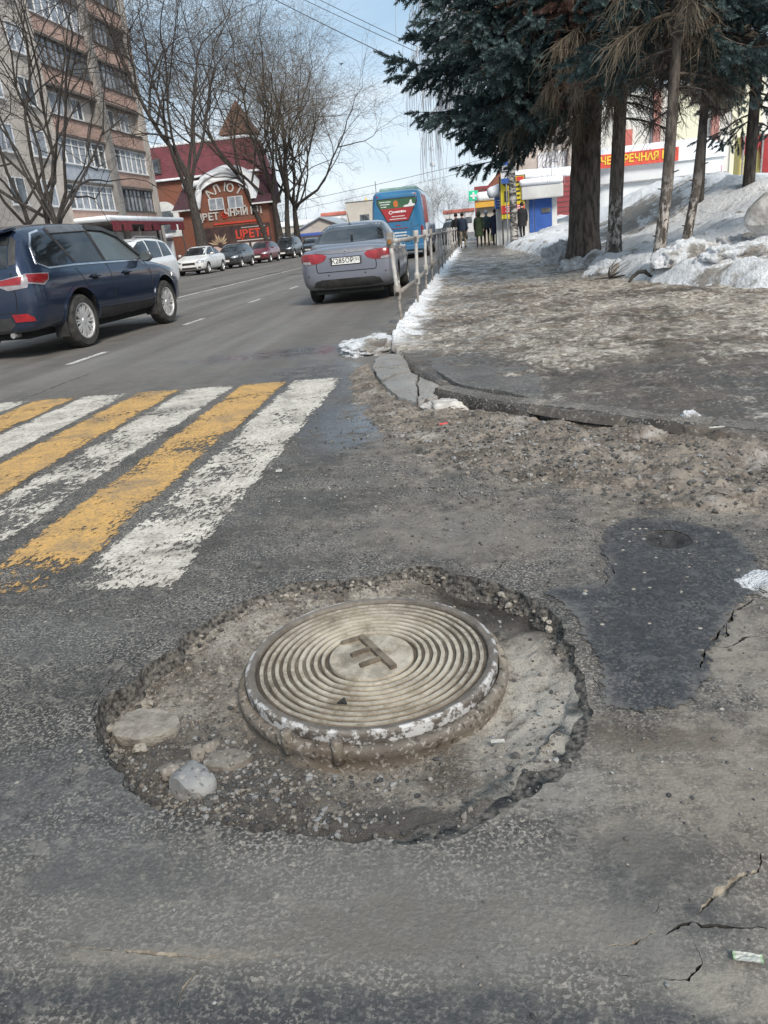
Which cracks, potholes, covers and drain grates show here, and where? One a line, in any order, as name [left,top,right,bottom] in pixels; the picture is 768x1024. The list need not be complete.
pothole [93,566,594,845]
crack [607,850,768,982]
crack [700,599,756,668]
manhole cover [238,597,509,773]
